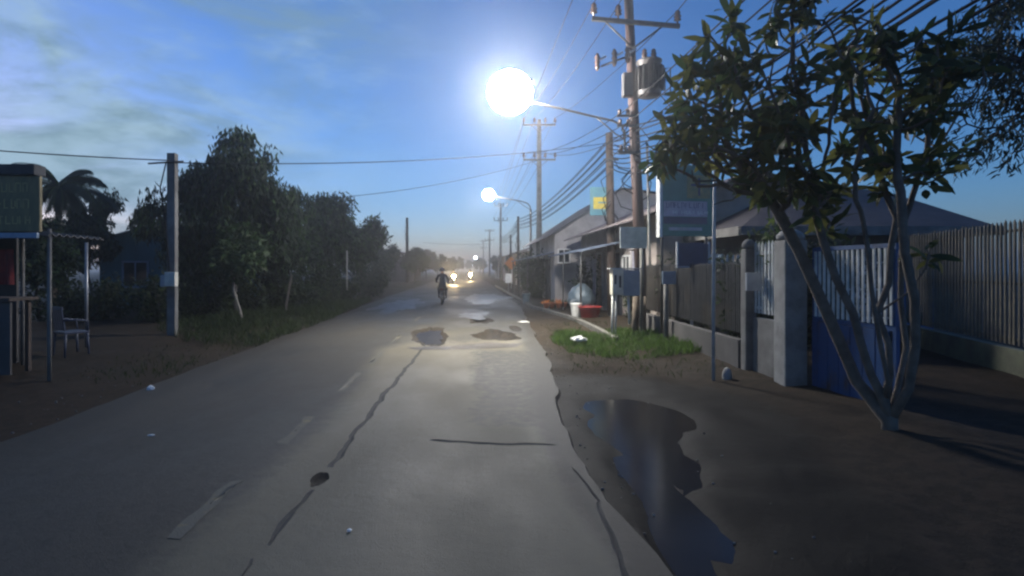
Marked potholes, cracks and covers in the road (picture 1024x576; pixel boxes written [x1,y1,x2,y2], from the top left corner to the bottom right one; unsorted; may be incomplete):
pothole [470,329,522,341]
crack [327,346,558,467]
pothole [411,327,449,346]
crack [570,466,629,576]
pothole [310,472,329,487]
